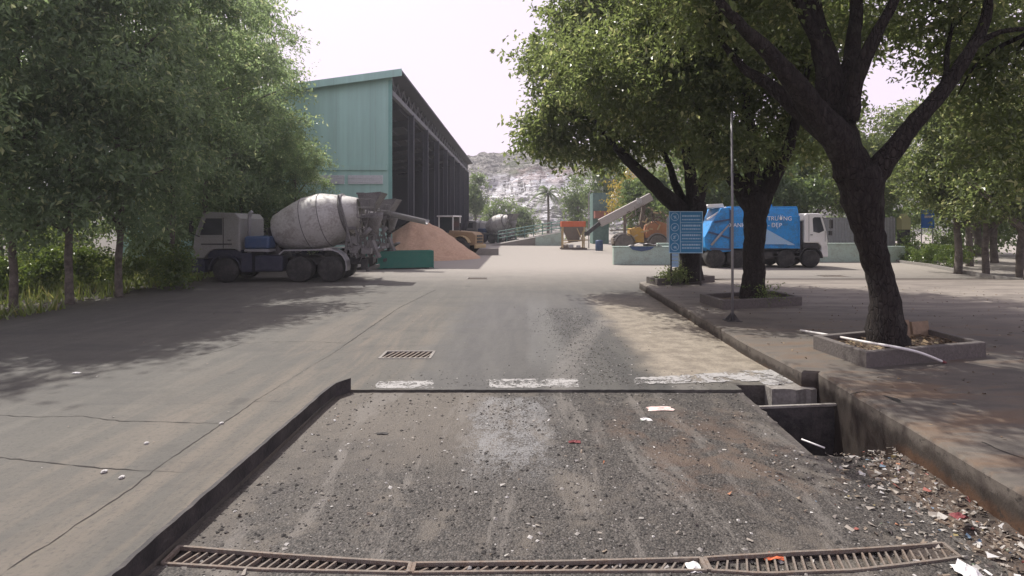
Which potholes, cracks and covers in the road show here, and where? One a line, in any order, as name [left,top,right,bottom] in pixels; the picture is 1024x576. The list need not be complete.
drain grate [703,541,961,576]
drain grate [410,556,709,575]
drain grate [161,545,413,575]
drain grate [378,351,436,359]
